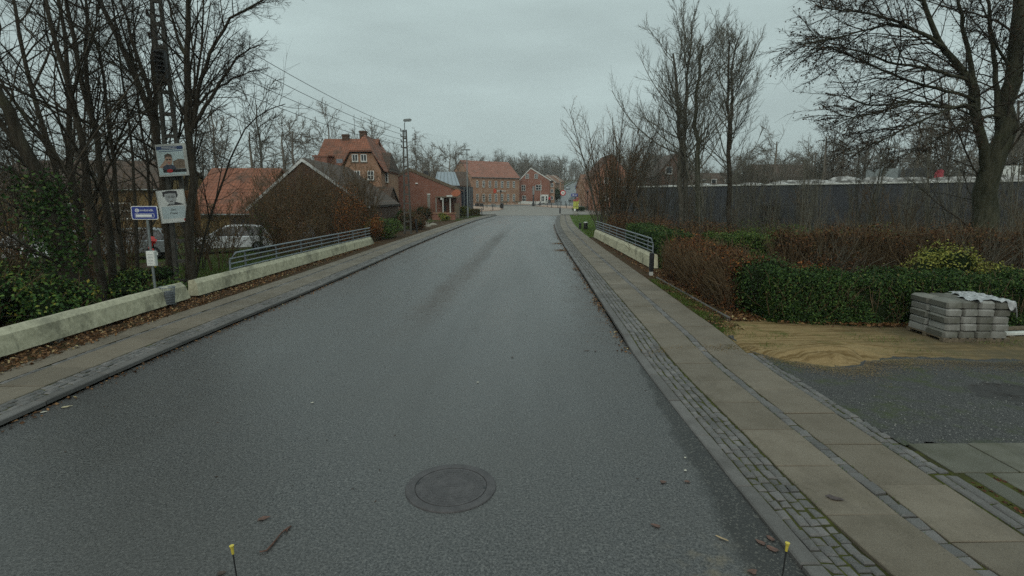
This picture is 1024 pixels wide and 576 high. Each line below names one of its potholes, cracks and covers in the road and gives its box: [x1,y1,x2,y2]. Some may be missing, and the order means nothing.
manhole cover [405,464,496,513]
